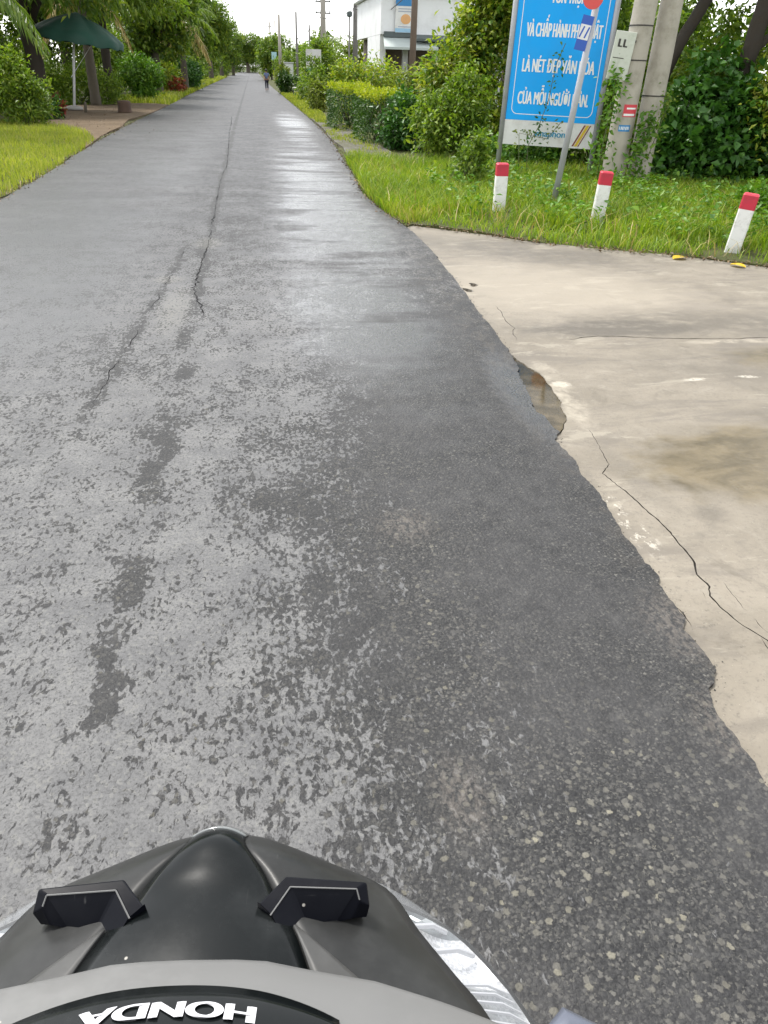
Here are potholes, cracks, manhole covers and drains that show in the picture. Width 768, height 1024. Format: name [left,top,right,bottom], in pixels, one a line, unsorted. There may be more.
crack [86,118,232,419]
crack [592,434,768,648]
